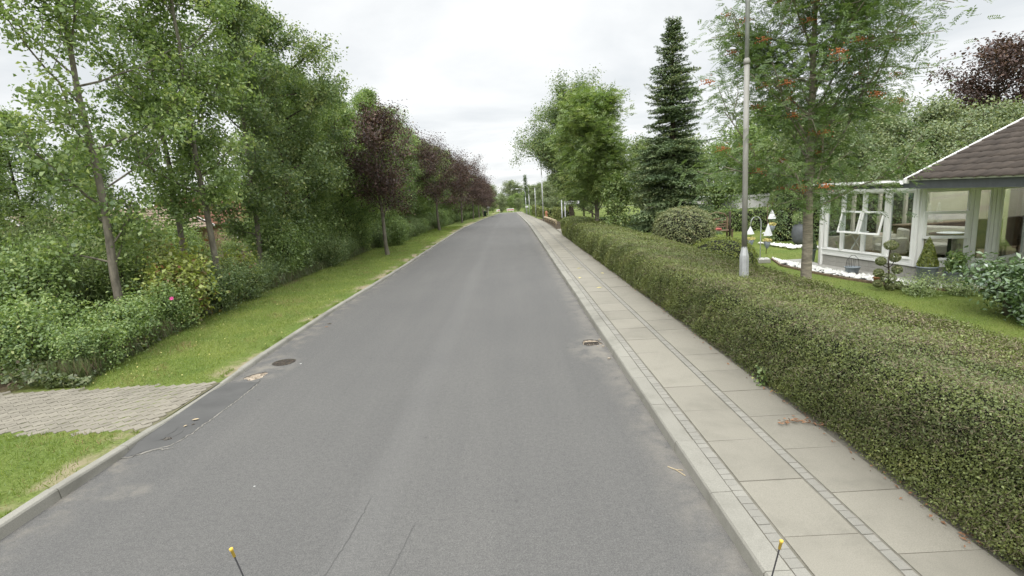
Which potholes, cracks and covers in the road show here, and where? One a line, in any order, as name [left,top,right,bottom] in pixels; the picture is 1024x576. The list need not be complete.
crack [323,496,372,576]
